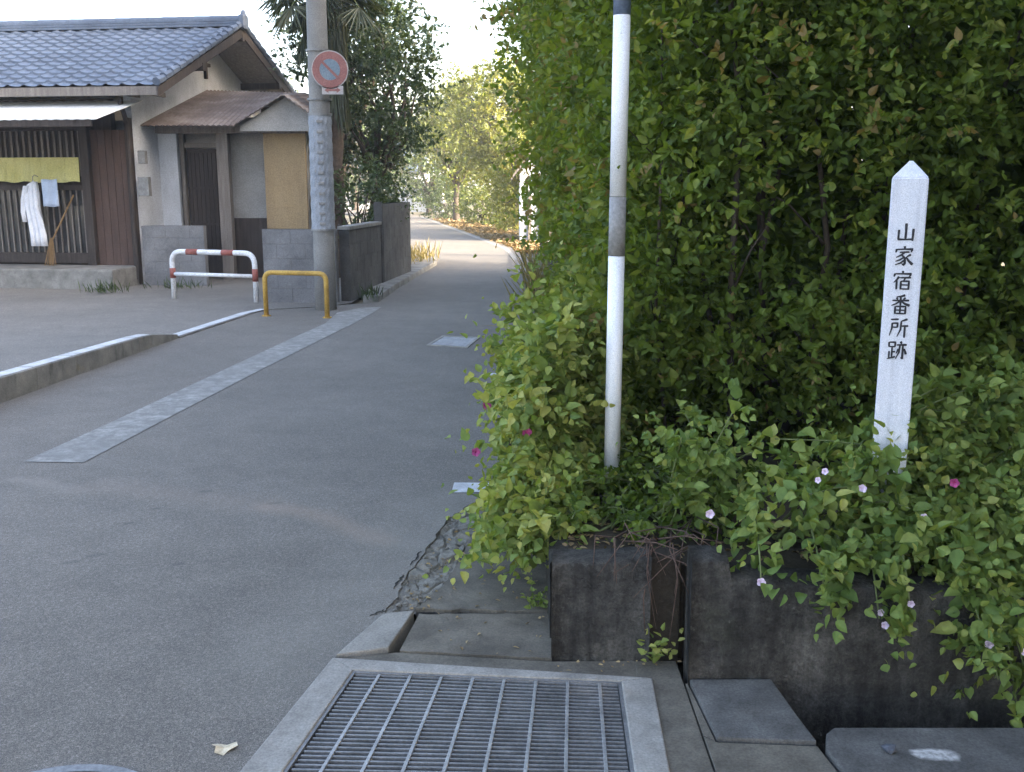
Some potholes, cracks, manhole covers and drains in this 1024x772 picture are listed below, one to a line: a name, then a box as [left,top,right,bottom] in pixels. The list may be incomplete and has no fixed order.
manhole cover [32,764,137,772]
manhole cover [426,336,480,348]
drain grate [240,658,670,772]
